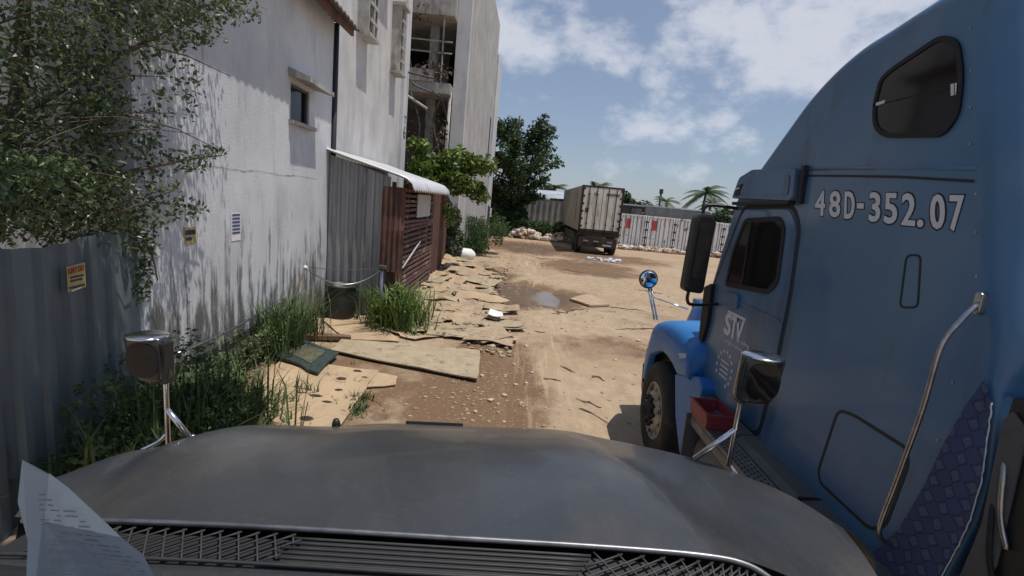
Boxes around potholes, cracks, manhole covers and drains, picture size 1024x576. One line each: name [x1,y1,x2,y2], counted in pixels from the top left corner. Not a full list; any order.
pothole [490,285,574,308]
